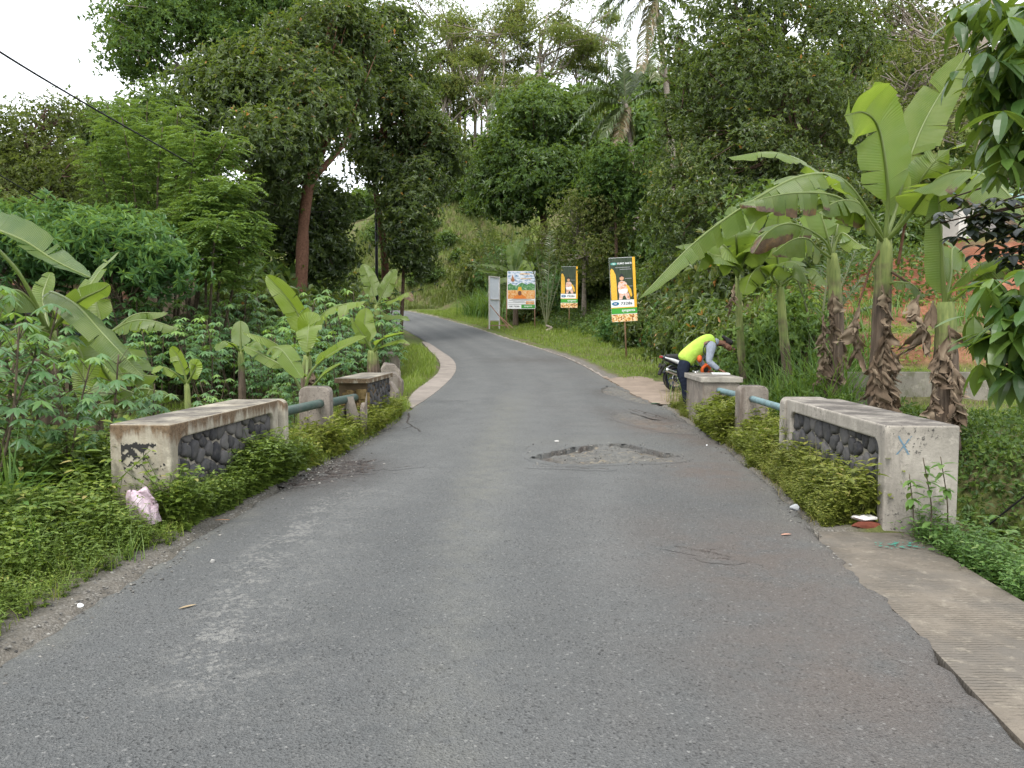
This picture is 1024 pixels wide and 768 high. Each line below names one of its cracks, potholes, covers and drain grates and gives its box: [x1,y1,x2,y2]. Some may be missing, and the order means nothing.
crack [624,408,673,420]
pothole [523,442,693,467]
crack [660,542,748,565]
crack [395,400,472,433]
